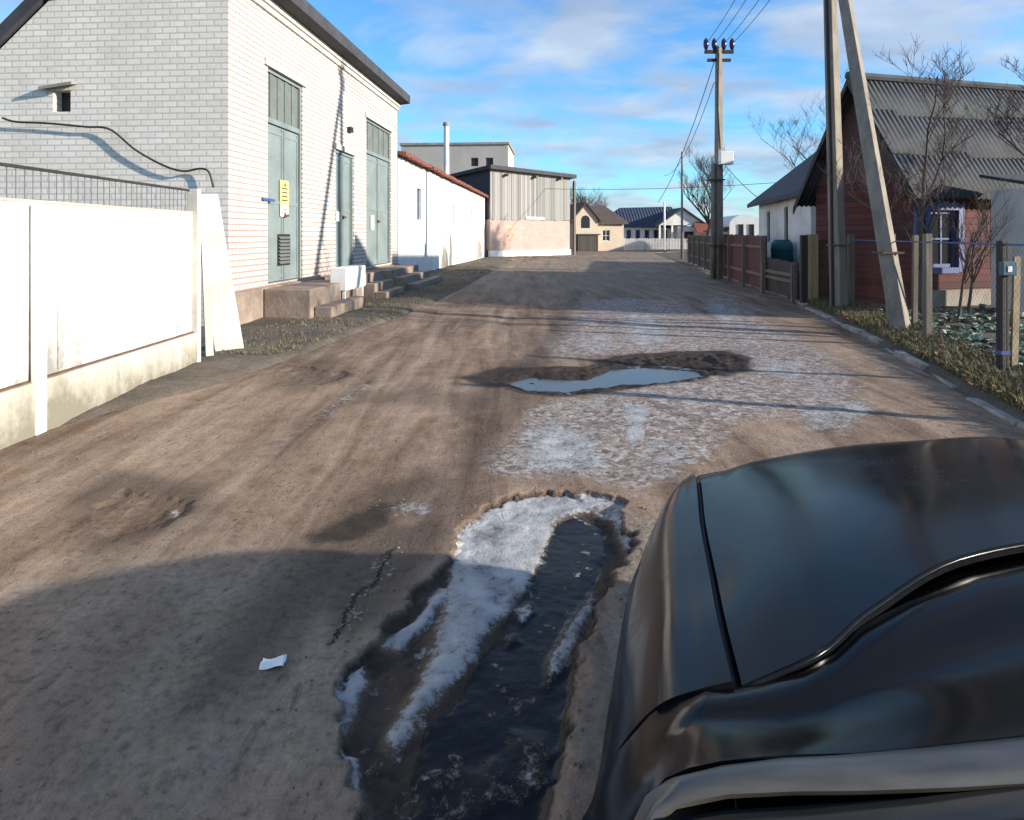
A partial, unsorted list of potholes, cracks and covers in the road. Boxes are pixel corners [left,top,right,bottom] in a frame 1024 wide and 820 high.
pothole [282,480,656,820]
crack [326,542,403,645]
pothole [53,481,217,556]
pothole [478,351,757,400]
